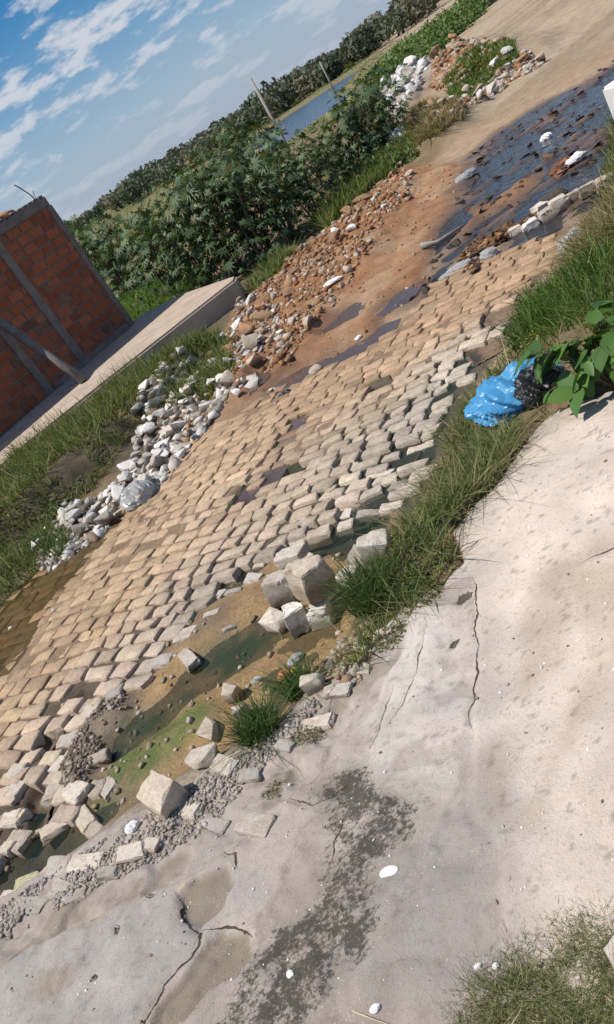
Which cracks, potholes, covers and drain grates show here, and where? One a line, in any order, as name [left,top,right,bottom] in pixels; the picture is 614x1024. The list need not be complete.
crack [468,578,479,728]
pothole [34,731,64,757]
pothole [69,684,102,700]
crack [370,648,422,747]
pothole [19,775,53,840]
crack [143,891,252,1024]
